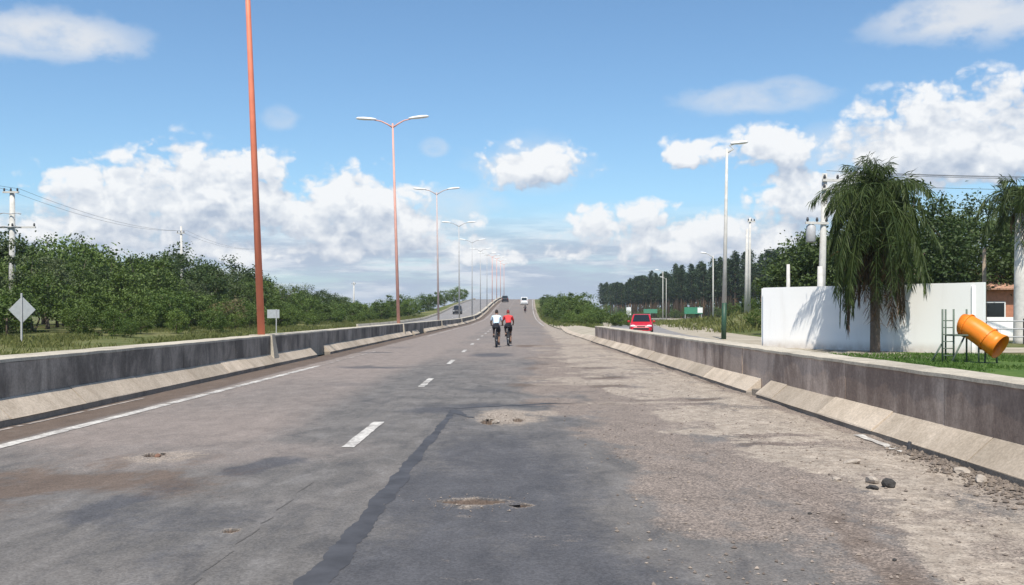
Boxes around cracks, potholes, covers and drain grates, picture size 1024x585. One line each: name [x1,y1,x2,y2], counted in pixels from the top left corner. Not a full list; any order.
pothole [475,418,506,426]
crack [191,482,313,585]
pothole [501,501,541,510]
pothole [429,496,522,507]
pothole [211,526,250,537]
